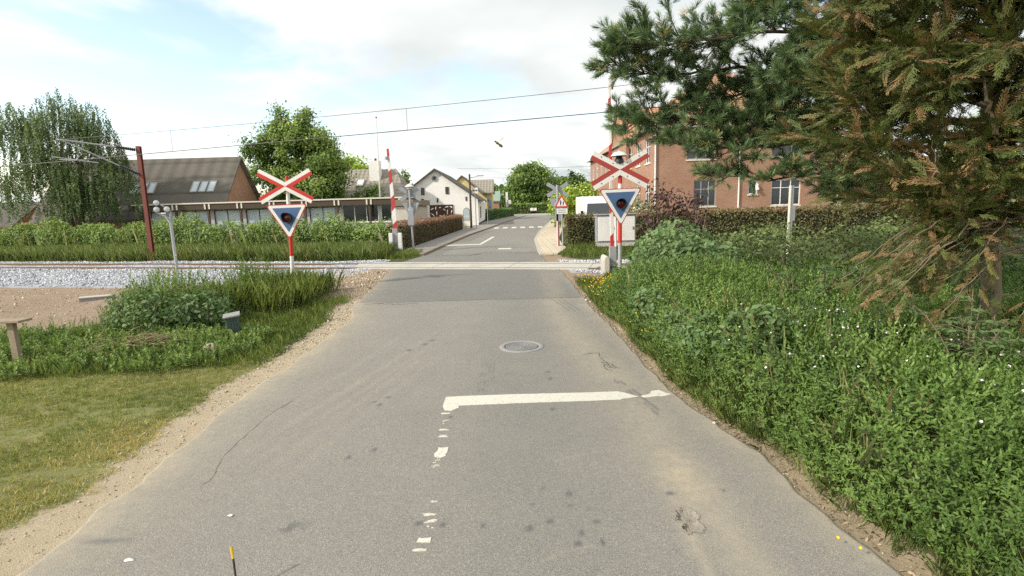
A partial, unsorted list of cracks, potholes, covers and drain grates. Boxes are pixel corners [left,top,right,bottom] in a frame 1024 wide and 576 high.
manhole cover [499,340,544,353]
pothole [671,505,706,535]
crack [204,400,293,484]
